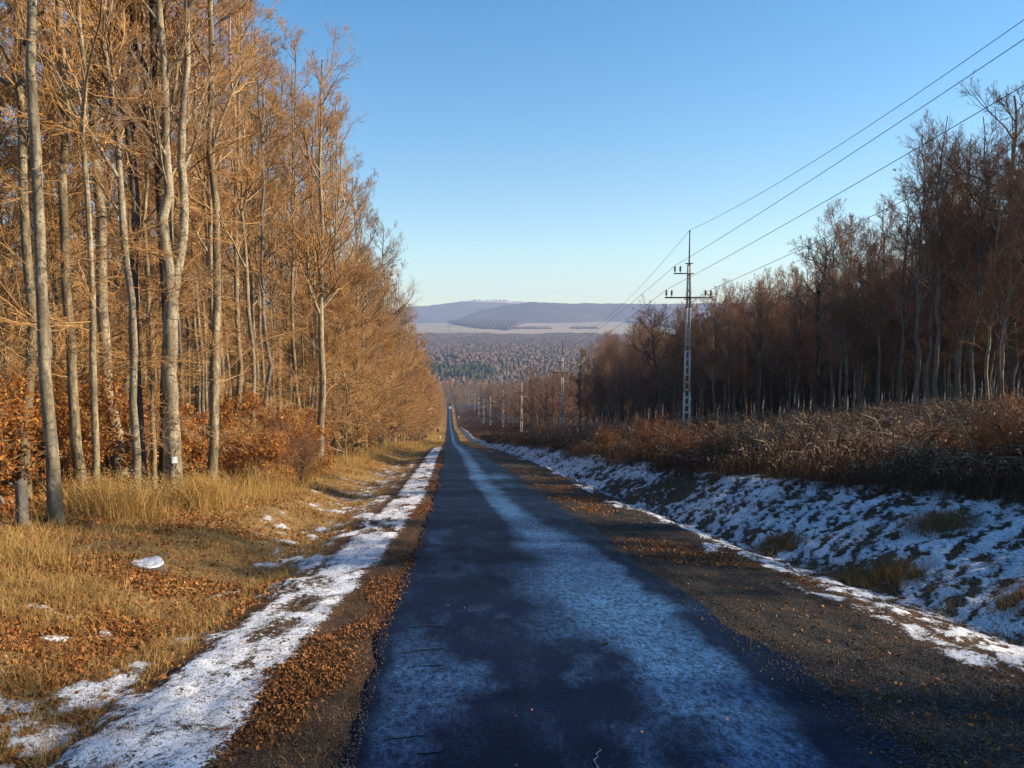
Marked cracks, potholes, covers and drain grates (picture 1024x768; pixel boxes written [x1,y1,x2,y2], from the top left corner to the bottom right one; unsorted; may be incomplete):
crack [383,735,443,755]
crack [401,648,443,668]
